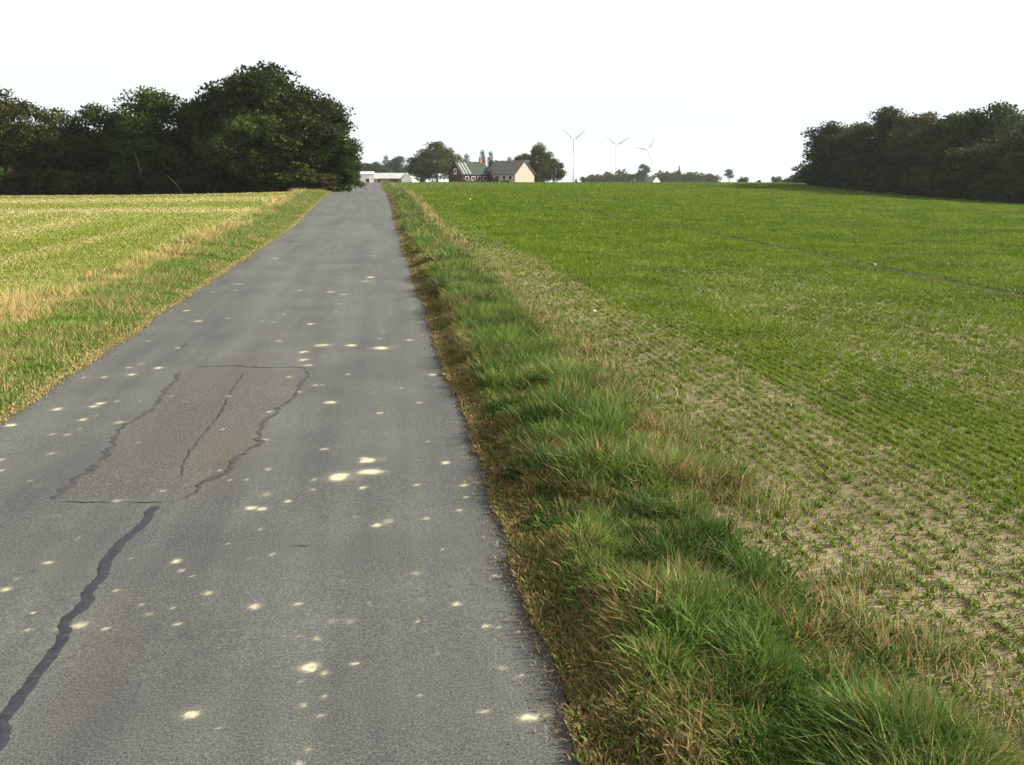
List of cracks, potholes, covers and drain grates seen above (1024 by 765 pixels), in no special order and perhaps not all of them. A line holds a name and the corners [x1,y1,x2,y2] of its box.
crack [51,342,312,503]
